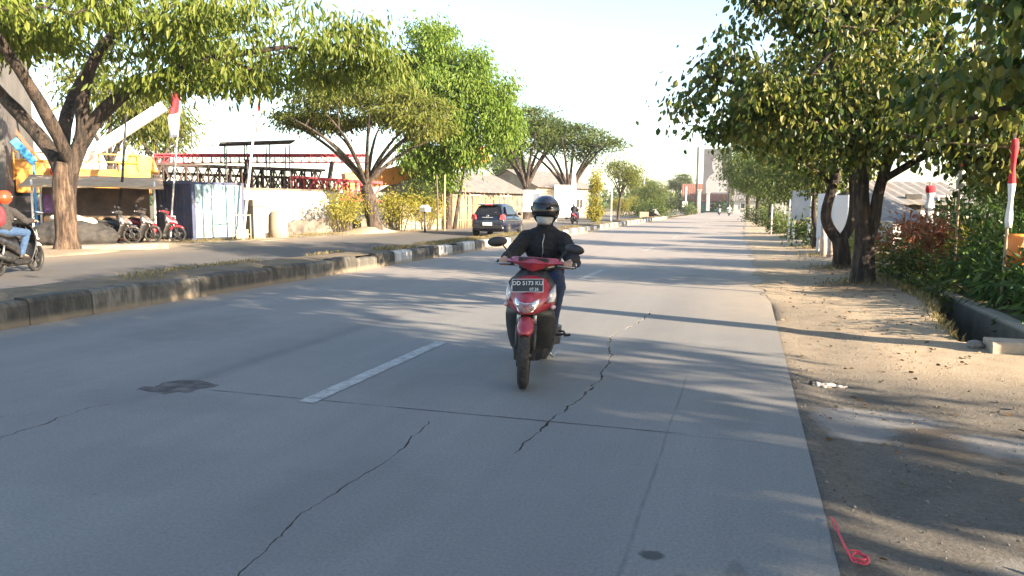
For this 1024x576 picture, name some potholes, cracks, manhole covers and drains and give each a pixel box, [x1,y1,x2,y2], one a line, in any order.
crack [516,311,651,452]
crack [0,403,111,438]
crack [237,420,430,576]
